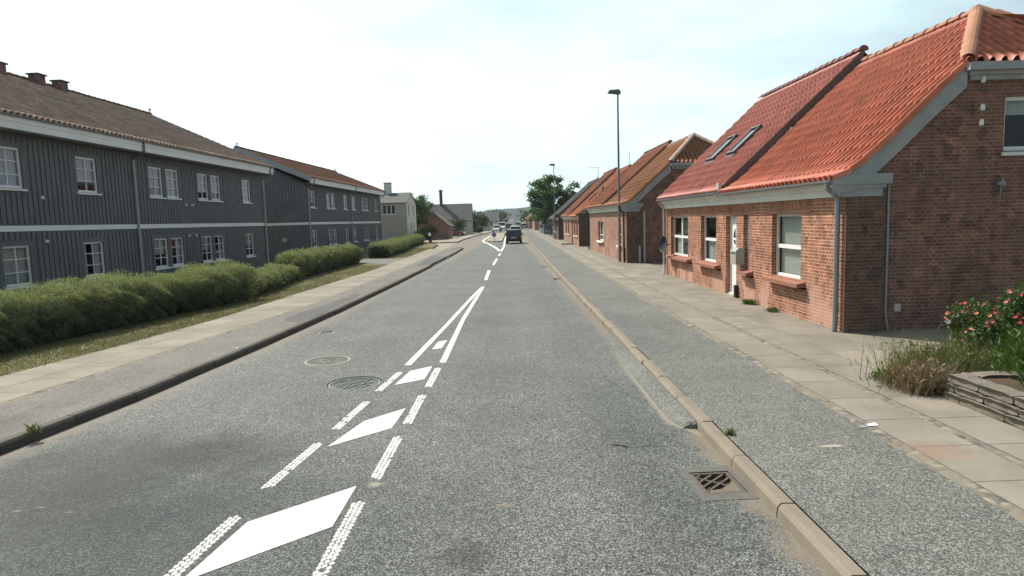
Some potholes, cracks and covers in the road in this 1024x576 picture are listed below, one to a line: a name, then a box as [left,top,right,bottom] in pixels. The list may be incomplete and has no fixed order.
drain grate [677,466,759,501]
manhole cover [304,356,351,366]
manhole cover [327,376,381,390]
